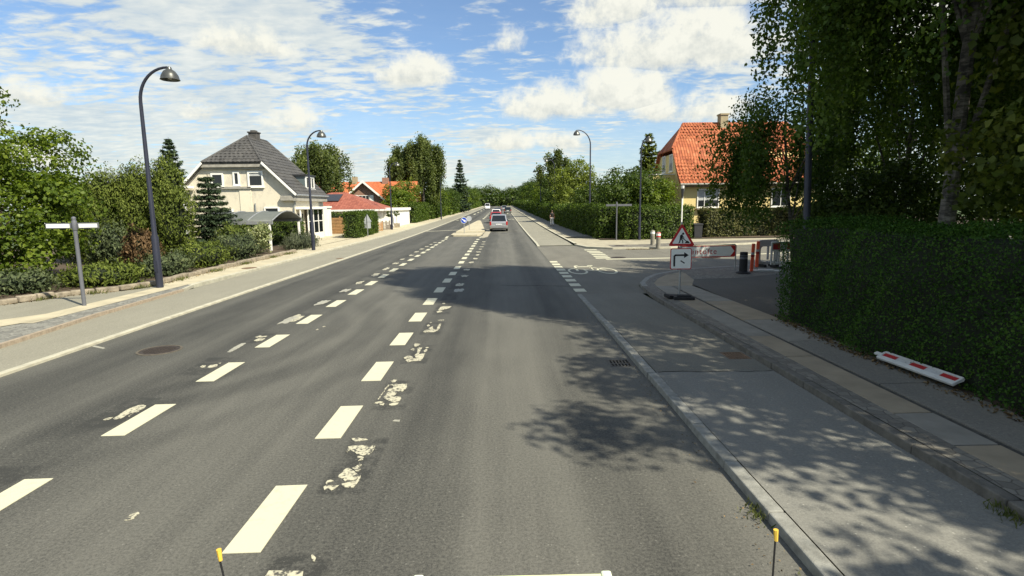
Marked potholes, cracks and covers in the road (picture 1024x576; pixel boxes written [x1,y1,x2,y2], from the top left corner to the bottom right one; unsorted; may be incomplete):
drain grate [607,359,634,367]
manhole cover [135,345,183,356]
